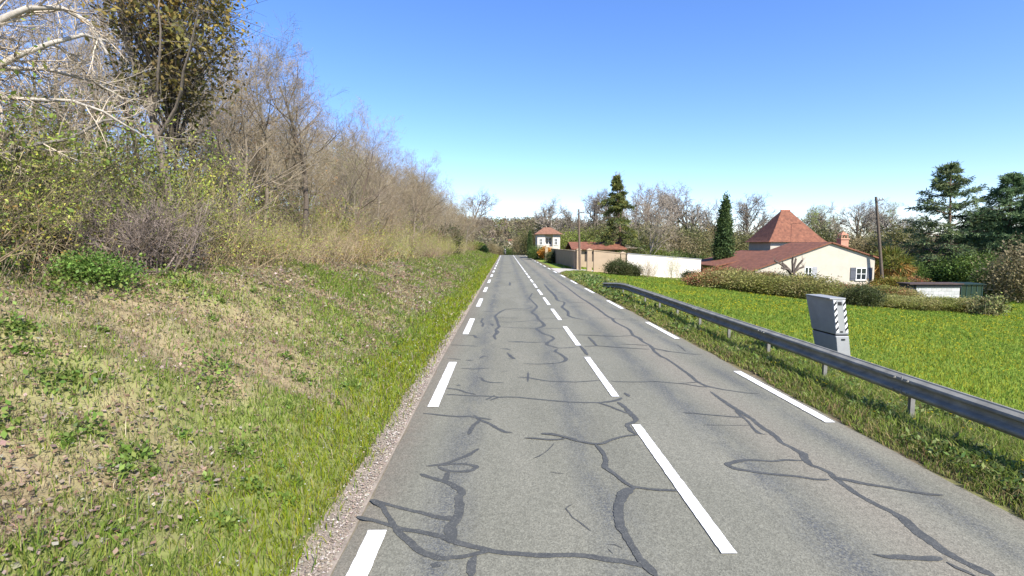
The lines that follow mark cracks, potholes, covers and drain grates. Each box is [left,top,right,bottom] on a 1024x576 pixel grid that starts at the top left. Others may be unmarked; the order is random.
crack [424,284,639,434]
